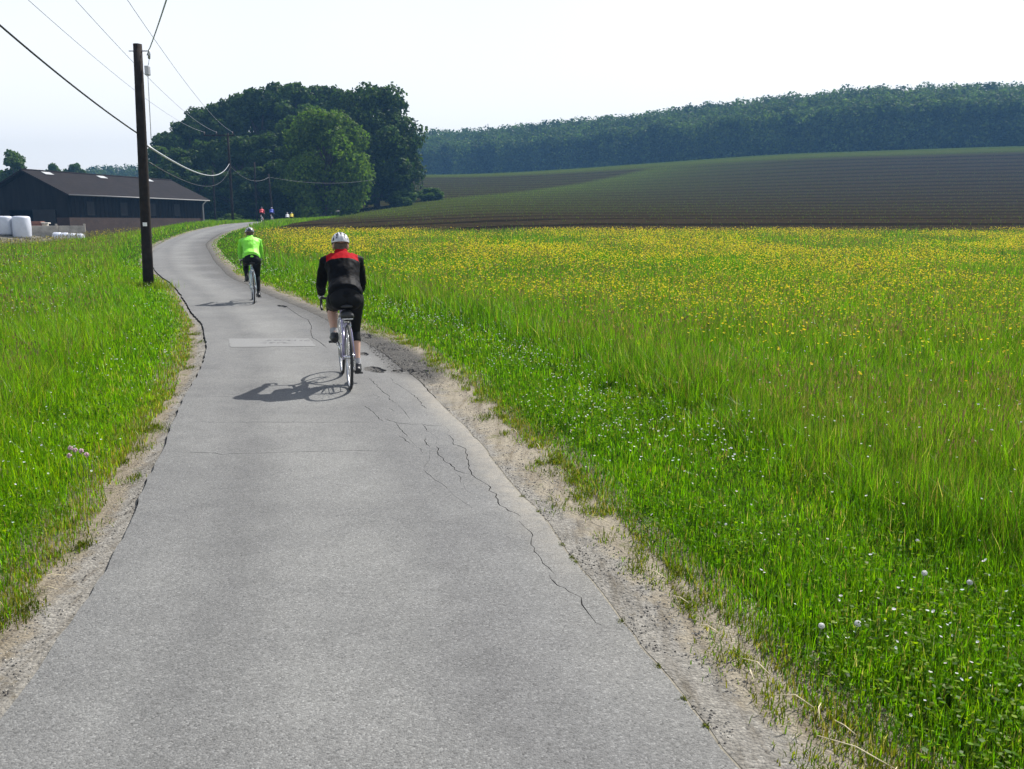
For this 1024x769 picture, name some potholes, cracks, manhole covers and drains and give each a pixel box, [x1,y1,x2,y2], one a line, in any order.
crack [373,377,598,624]
